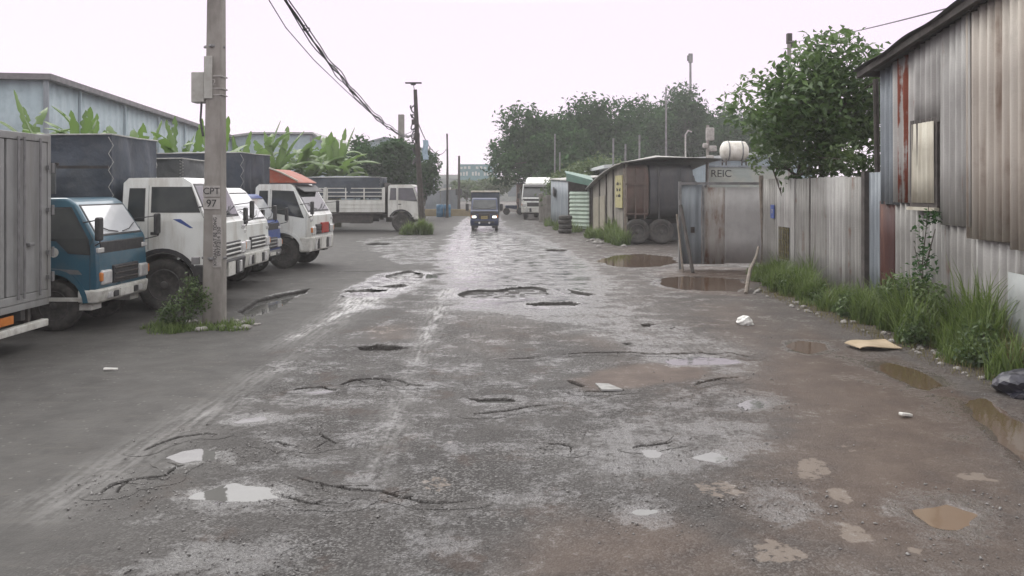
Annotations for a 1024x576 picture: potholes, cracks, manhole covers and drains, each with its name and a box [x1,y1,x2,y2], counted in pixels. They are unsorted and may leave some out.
crack [456,386,640,418]
pothole [369,269,438,282]
pothole [446,393,535,409]
pothole [508,300,595,309]
pothole [227,287,325,320]
crack [79,428,352,500]
crack [496,349,765,388]
crack [265,472,493,512]
pothole [339,342,430,356]
pothole [440,285,571,301]
crack [279,375,439,393]
